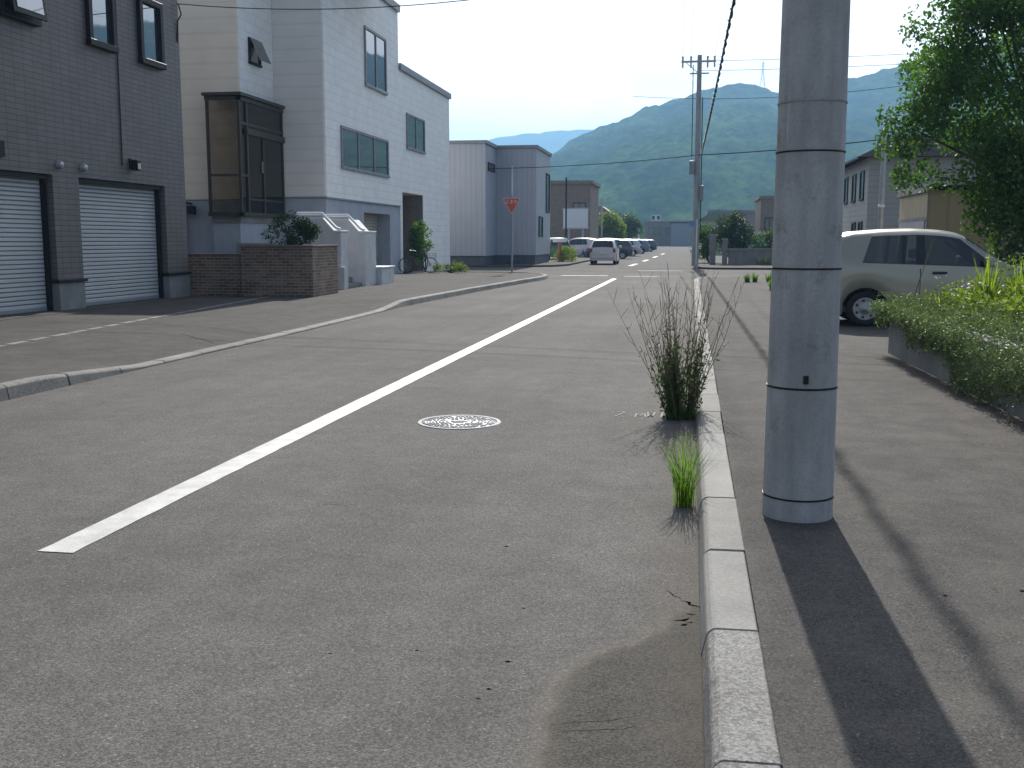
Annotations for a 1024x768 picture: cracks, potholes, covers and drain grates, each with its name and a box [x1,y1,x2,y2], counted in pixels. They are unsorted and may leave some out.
crack [557,714,644,732]
crack [666,590,700,626]
manhole cover [417,415,501,430]
